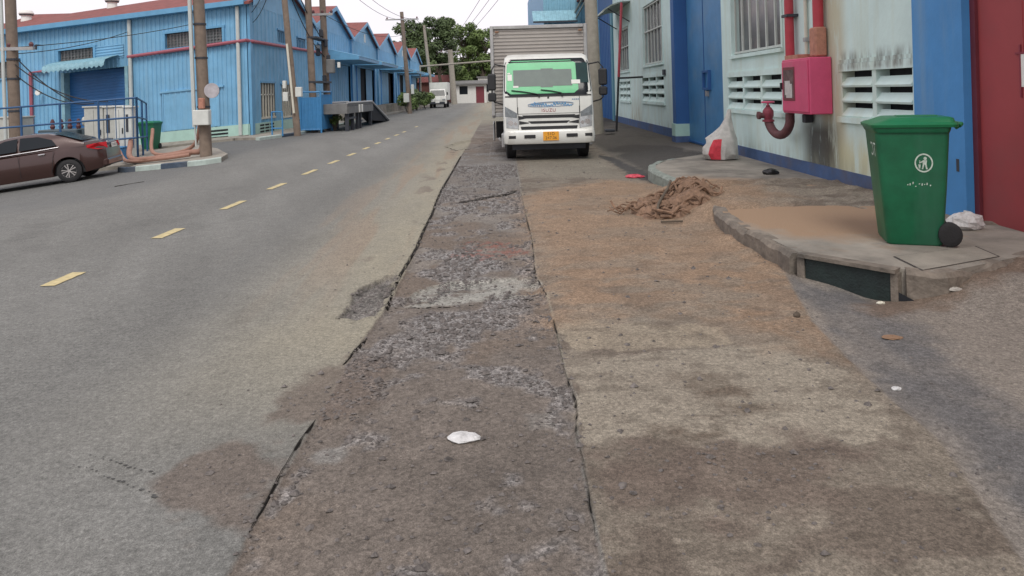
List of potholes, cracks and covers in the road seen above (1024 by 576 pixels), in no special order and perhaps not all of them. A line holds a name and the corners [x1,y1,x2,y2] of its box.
crack [387,156,547,311]
drain grate [797,251,914,302]
crack [249,419,316,533]
manhole cover [893,246,999,270]
crack [343,338,367,365]
crack [553,320,595,533]
